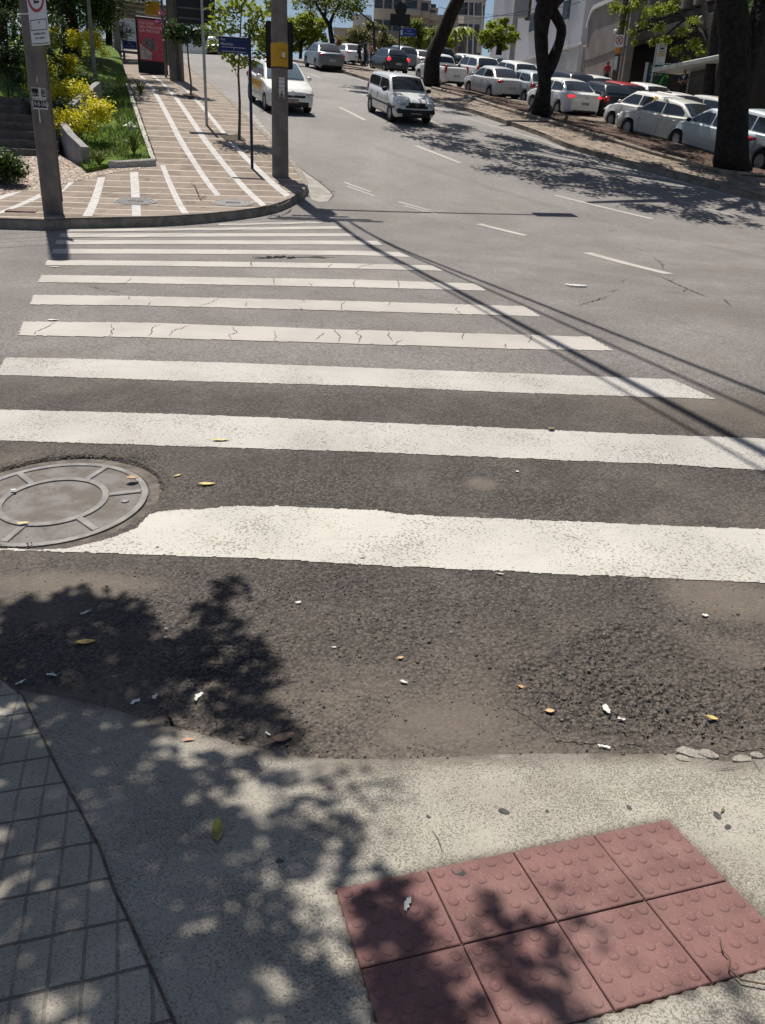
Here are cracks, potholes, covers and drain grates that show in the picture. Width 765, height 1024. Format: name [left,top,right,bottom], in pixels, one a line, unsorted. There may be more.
manhole cover [114,197,157,205]
manhole cover [213,199,253,207]
manhole cover [0,459,162,552]
